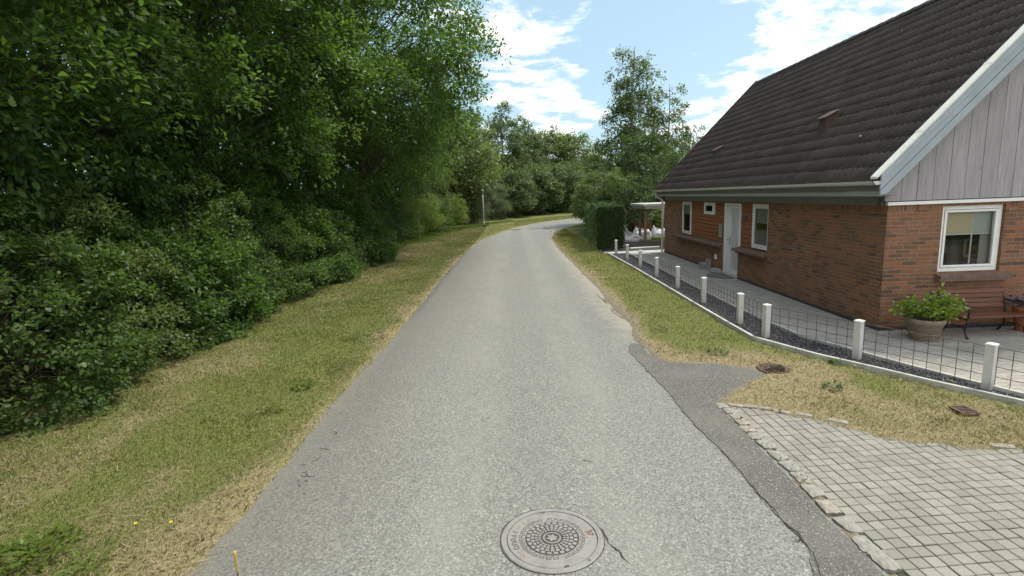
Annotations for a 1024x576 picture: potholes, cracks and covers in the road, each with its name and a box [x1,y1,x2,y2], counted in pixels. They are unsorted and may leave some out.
drain grate [947,405,981,417]
manhole cover [500,508,605,574]
